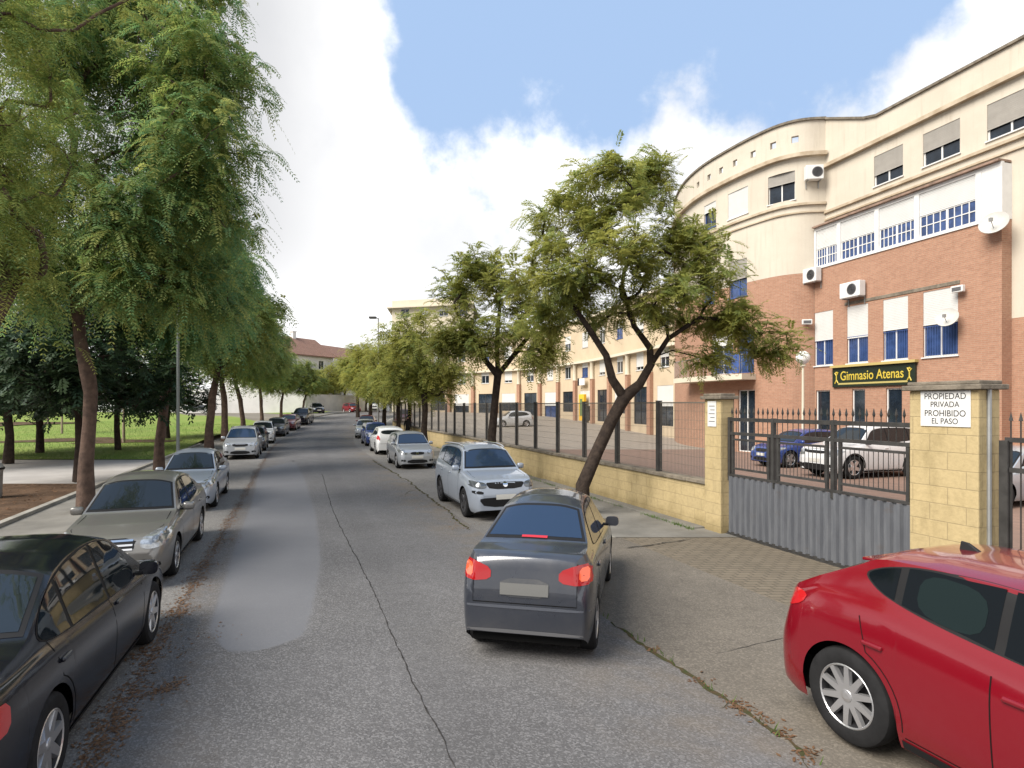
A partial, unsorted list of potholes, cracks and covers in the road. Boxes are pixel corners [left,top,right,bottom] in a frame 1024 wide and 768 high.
crack [322,475,456,768]
crack [611,622,809,768]
crack [374,461,470,530]
